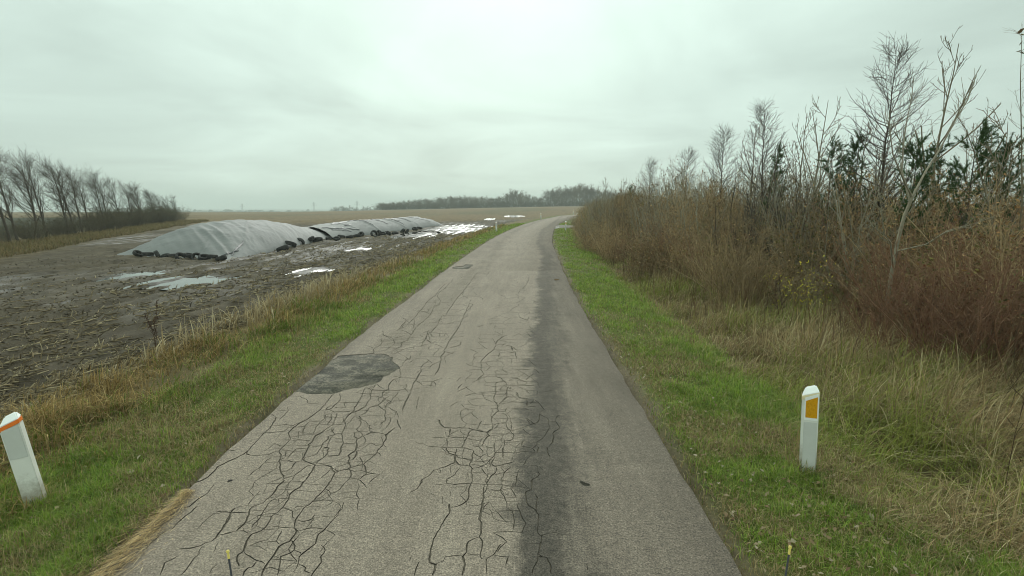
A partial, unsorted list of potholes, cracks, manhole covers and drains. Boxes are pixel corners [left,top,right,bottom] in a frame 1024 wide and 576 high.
crack [138,261,492,576]
crack [409,275,560,576]
